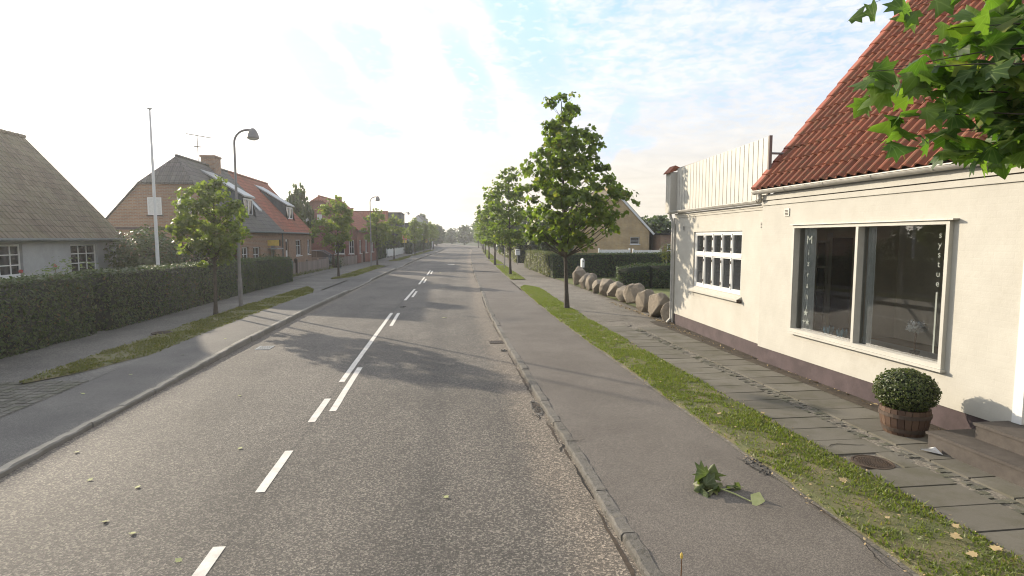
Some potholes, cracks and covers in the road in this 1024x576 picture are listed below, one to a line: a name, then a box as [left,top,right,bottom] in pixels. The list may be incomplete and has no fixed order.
pothole [530,400,543,416]
manhole cover [851,455,895,470]
